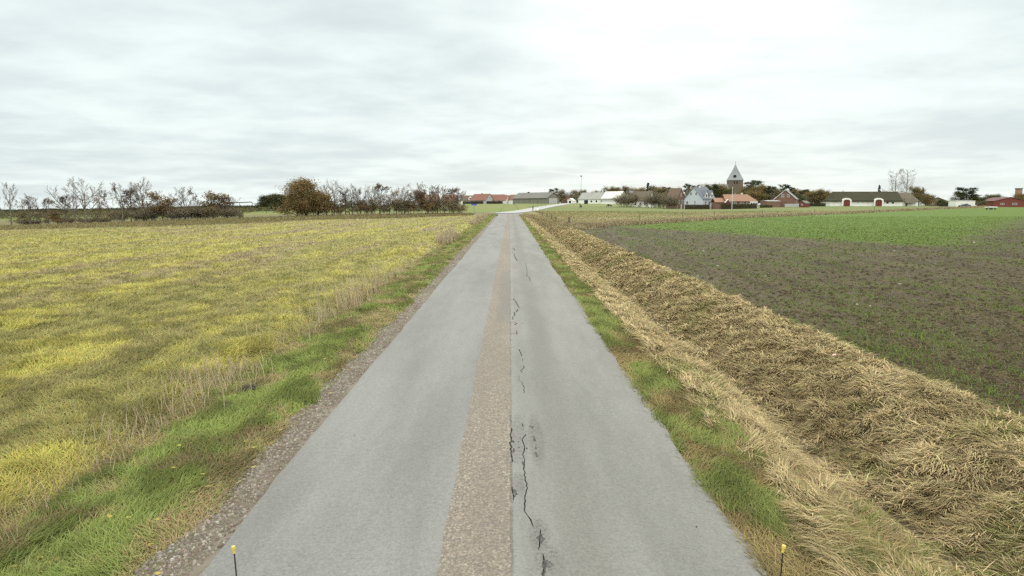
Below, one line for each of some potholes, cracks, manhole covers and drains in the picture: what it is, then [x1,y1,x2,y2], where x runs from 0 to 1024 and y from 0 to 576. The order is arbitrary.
crack [509,425,553,576]
